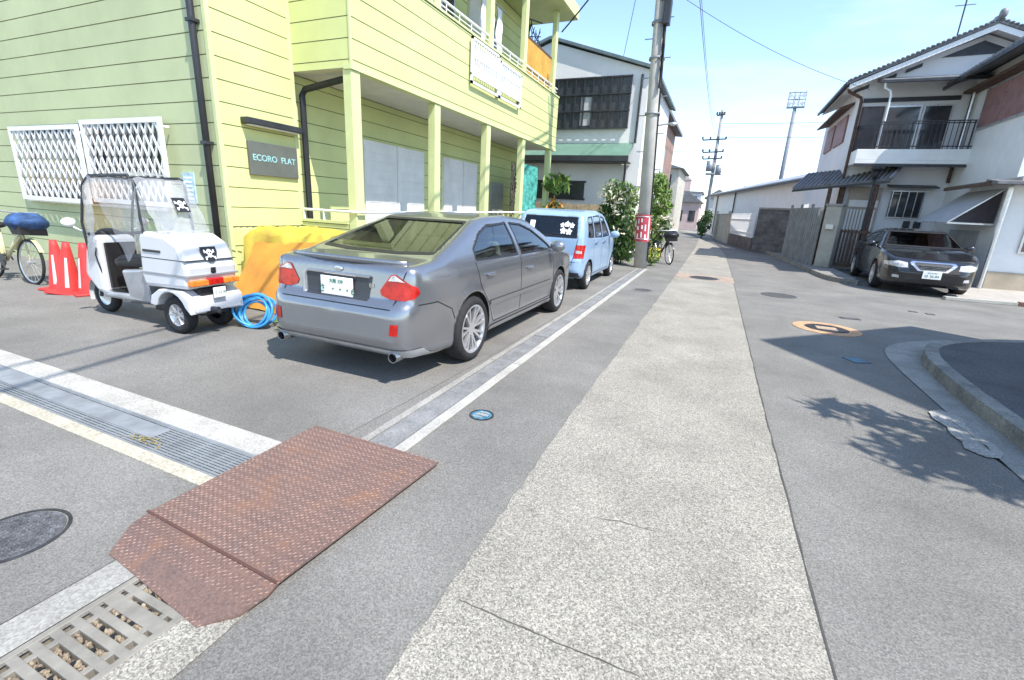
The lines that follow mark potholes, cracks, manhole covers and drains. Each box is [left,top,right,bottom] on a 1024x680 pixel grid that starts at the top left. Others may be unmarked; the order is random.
drain grate [0,576,184,680]
manhole cover [0,508,73,564]
drain grate [0,349,282,486]
manhole cover [792,321,863,337]
manhole cover [469,409,494,421]
crack [459,599,645,680]
